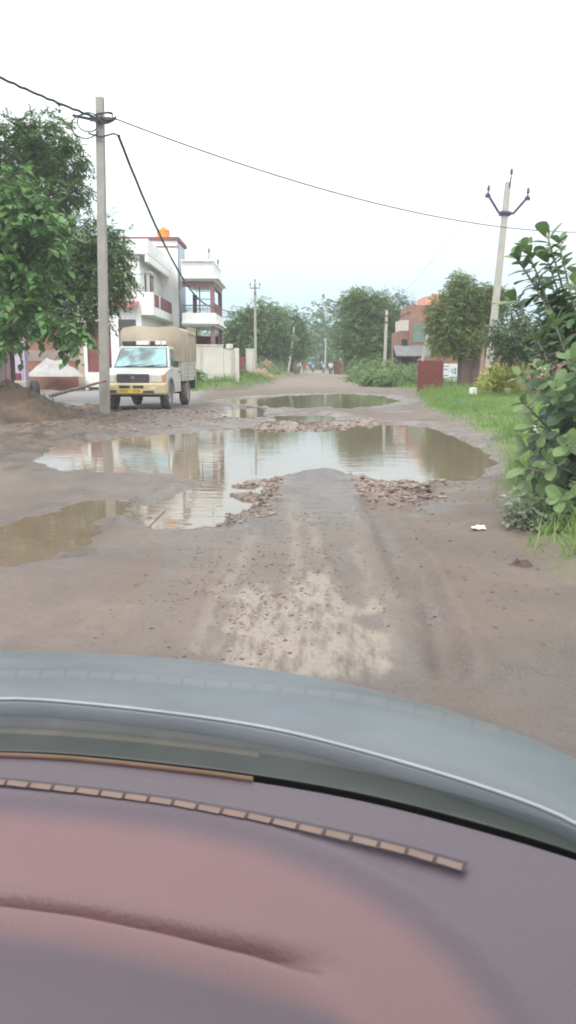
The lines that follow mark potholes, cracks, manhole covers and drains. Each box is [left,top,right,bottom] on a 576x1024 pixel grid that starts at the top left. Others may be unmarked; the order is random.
pothole [218,393,401,409]
pothole [15,421,499,529]
pothole [0,497,166,567]
